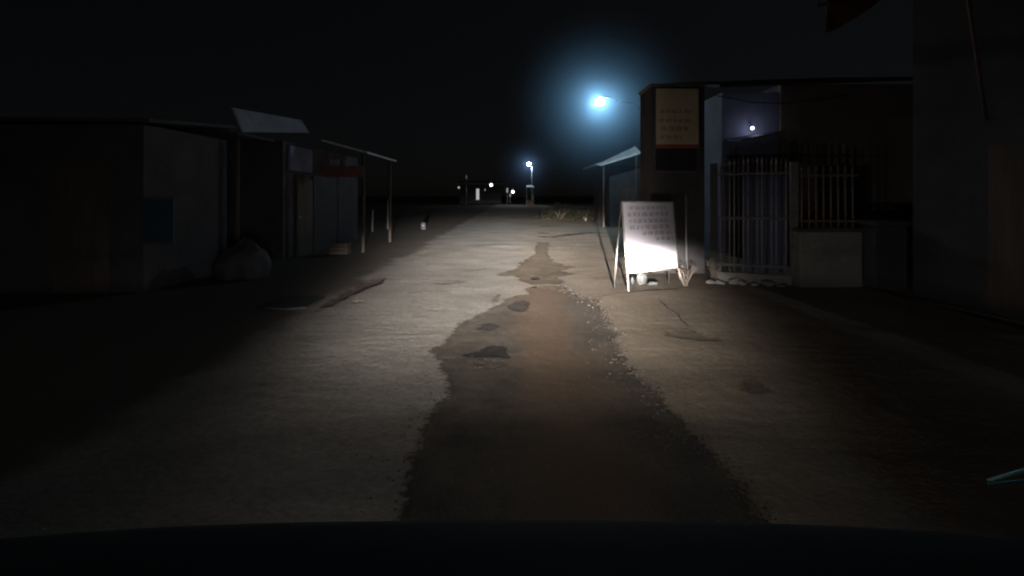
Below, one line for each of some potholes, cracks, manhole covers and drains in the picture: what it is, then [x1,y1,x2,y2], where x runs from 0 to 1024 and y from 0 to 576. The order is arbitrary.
pothole [462,346,510,359]
pothole [508,301,529,312]
crack [595,286,692,327]
